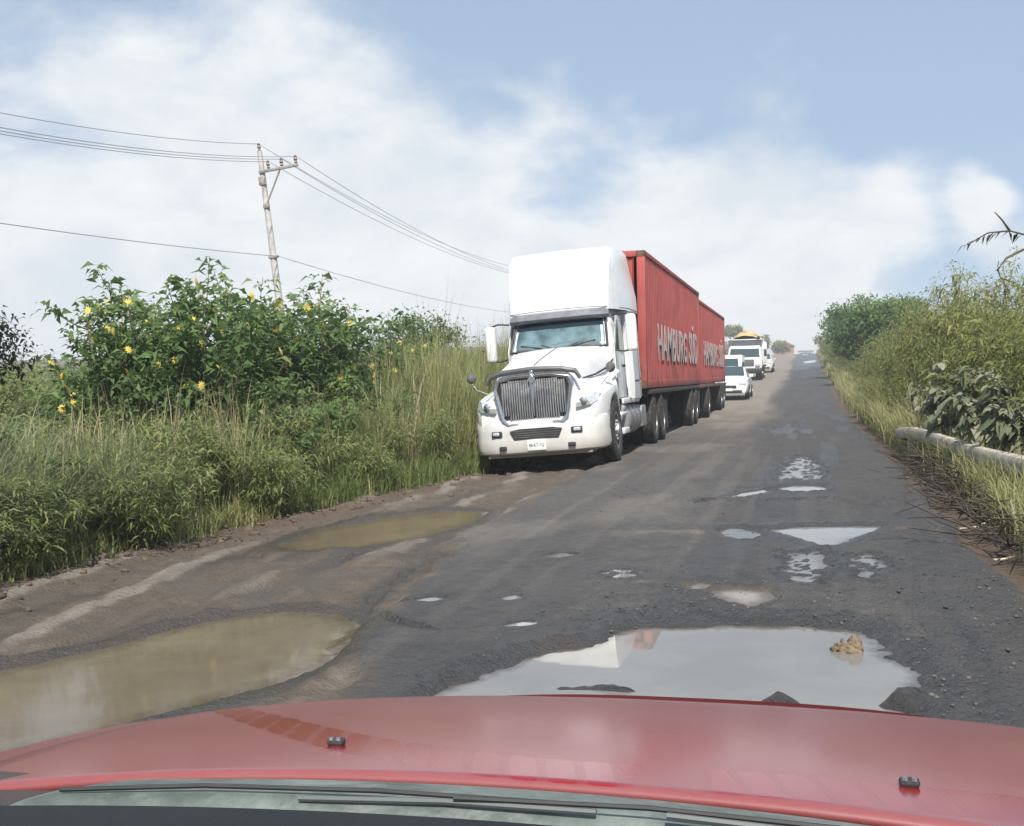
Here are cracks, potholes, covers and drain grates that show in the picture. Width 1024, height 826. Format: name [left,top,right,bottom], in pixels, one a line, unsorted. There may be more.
pothole [770,454,830,481]
pothole [0,603,382,752]
pothole [726,487,770,497]
pothole [763,520,900,547]
pothole [705,584,781,606]
pothole [265,507,496,550]
pothole [767,544,842,583]
pothole [394,604,960,719]
pothole [765,482,835,492]
pothole [587,569,648,578]
pothole [708,523,772,539]
pothole [407,594,447,602]
